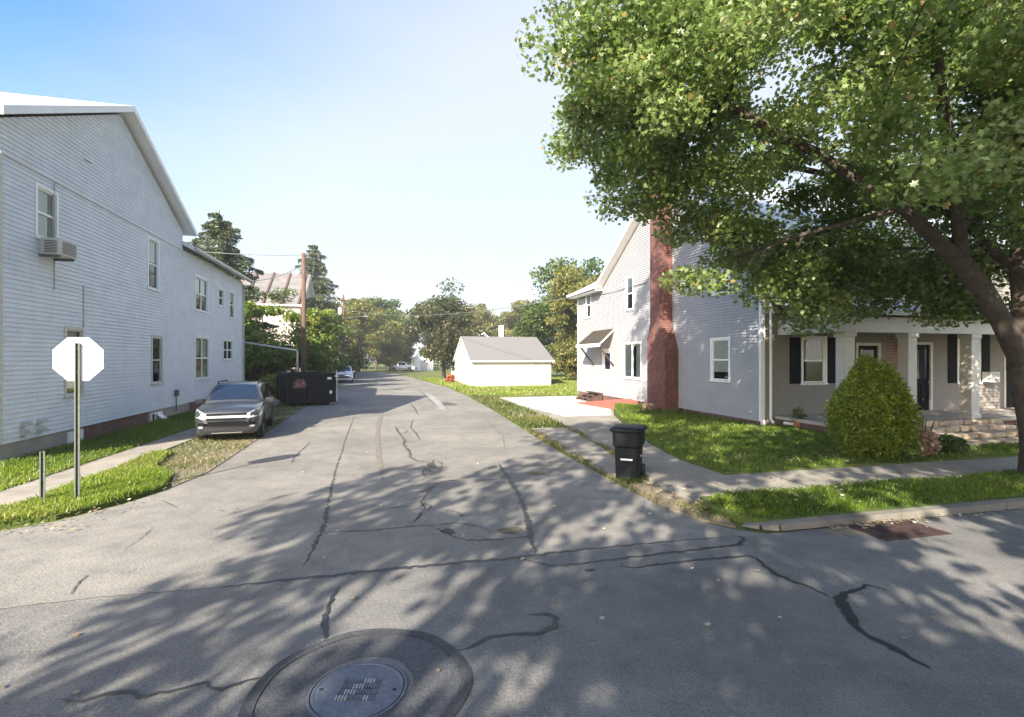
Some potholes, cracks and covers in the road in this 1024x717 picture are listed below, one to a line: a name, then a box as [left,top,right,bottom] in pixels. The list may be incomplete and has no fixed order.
crack [303,387,573,565]
drain grate [849,520,952,541]
manhole cover [306,661,407,717]
